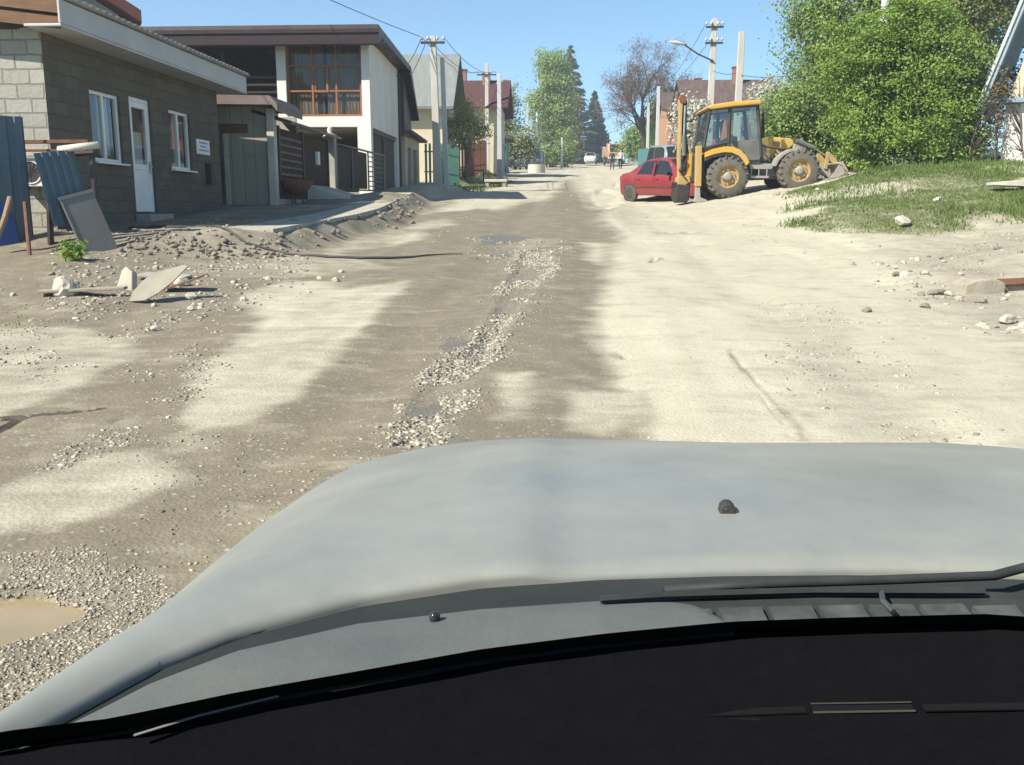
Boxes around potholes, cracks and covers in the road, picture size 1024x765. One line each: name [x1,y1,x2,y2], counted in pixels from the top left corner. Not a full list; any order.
pothole [389,250,558,448]
crack [726,351,801,437]
pothole [0,586,91,647]
